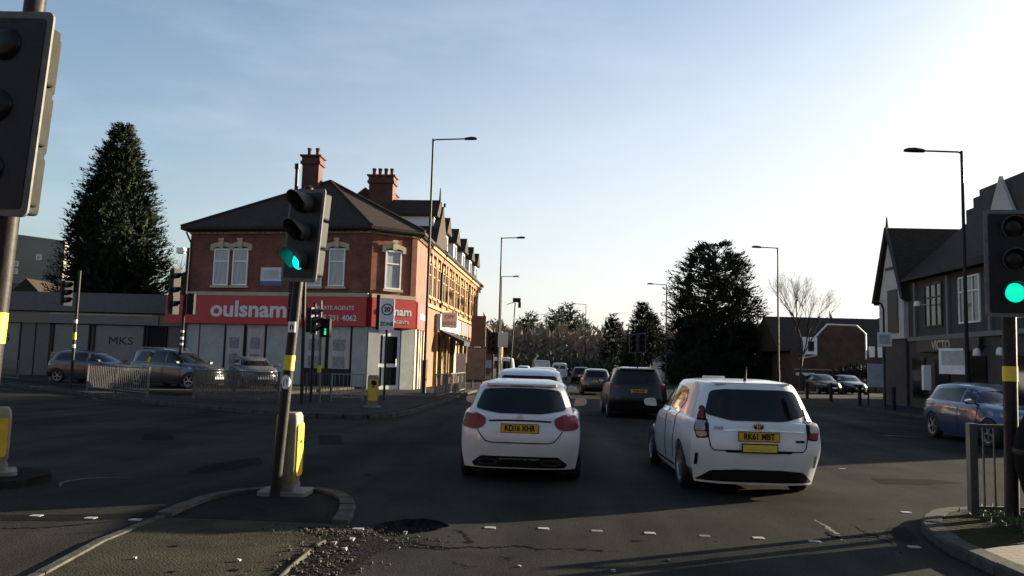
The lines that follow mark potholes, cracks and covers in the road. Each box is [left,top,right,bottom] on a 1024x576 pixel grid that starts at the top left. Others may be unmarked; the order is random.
pothole [370,518,449,535]
crack [390,530,598,567]
